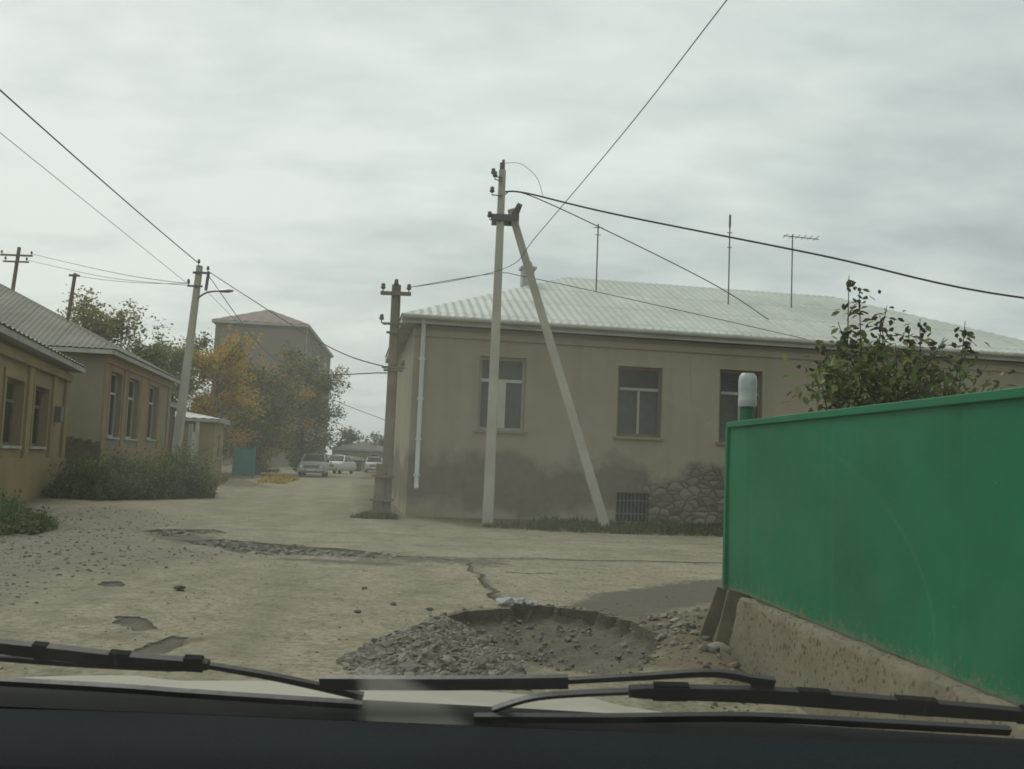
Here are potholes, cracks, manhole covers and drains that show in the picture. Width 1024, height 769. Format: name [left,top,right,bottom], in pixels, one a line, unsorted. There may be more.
pothole [112,616,158,631]
pothole [181,539,407,558]
pothole [131,636,190,654]
pothole [448,605,668,674]
crack [418,557,718,602]
pothole [145,529,227,537]
